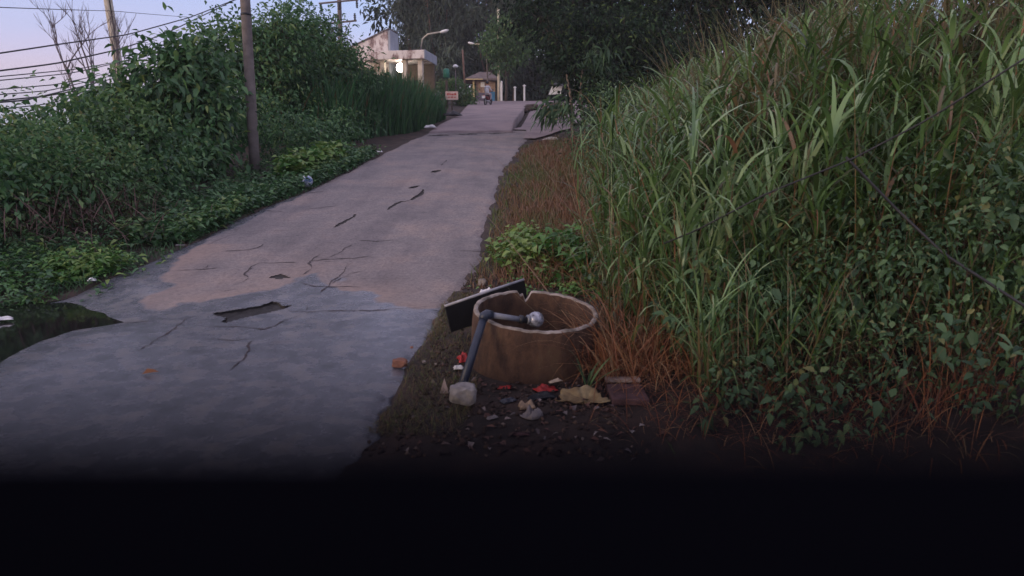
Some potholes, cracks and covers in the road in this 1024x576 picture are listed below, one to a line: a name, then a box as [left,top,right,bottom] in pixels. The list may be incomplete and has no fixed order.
pothole [214,301,292,323]
crack [217,240,425,369]
crack [190,244,284,291]
